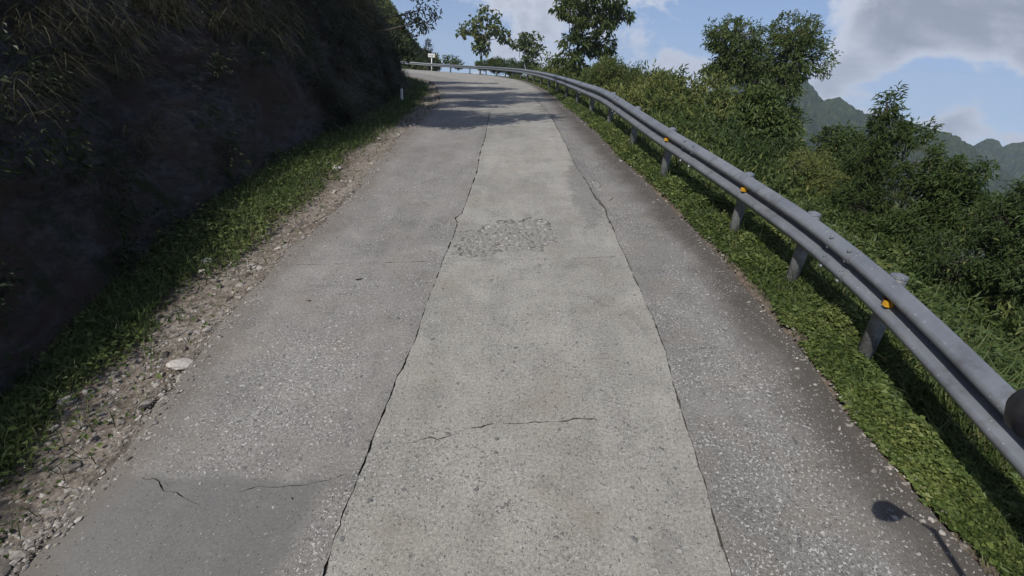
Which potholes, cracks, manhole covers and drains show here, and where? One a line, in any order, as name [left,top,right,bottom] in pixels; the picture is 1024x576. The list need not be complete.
crack [242,473,349,492]
crack [412,418,600,443]
crack [143,478,220,505]
